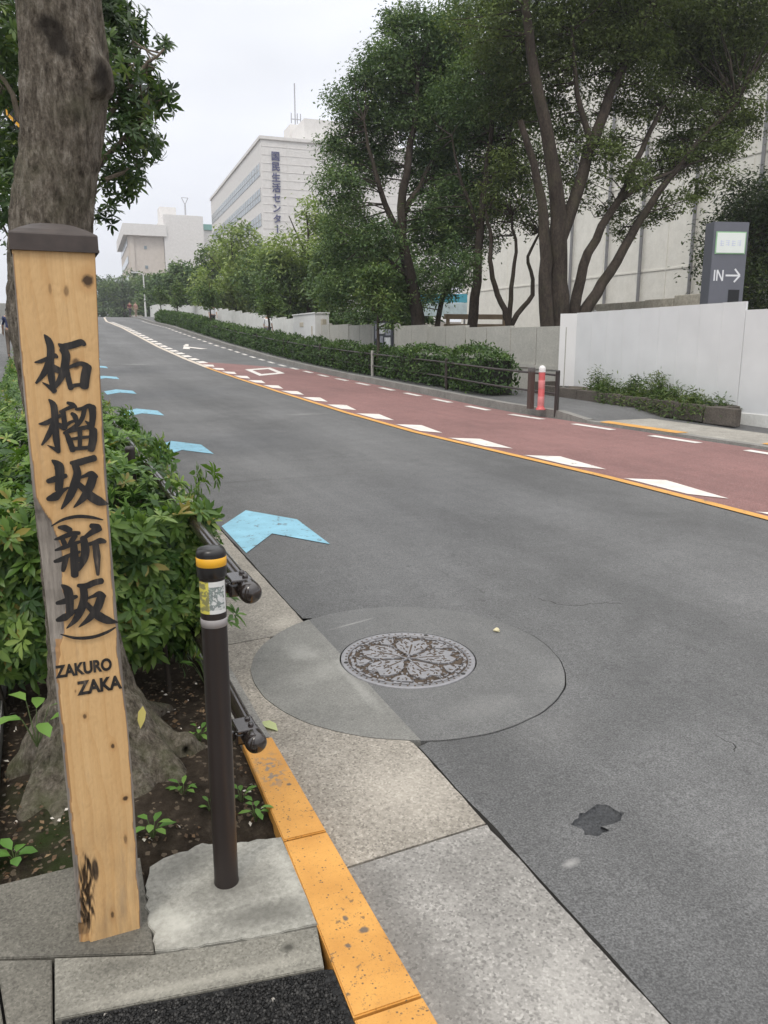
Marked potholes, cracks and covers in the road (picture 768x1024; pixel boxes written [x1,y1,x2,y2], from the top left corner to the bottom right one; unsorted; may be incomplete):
manhole cover [341,632,475,689]
pothole [571,804,624,836]
